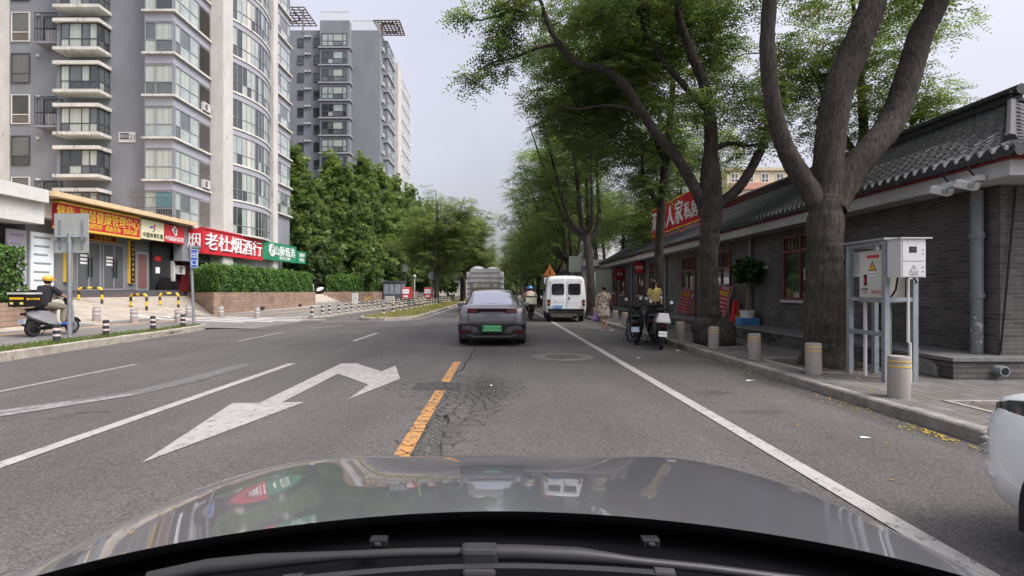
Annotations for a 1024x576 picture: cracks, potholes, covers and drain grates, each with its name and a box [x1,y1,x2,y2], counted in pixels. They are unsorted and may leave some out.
crack [380,347,524,456]
manhole cover [532,353,594,361]
